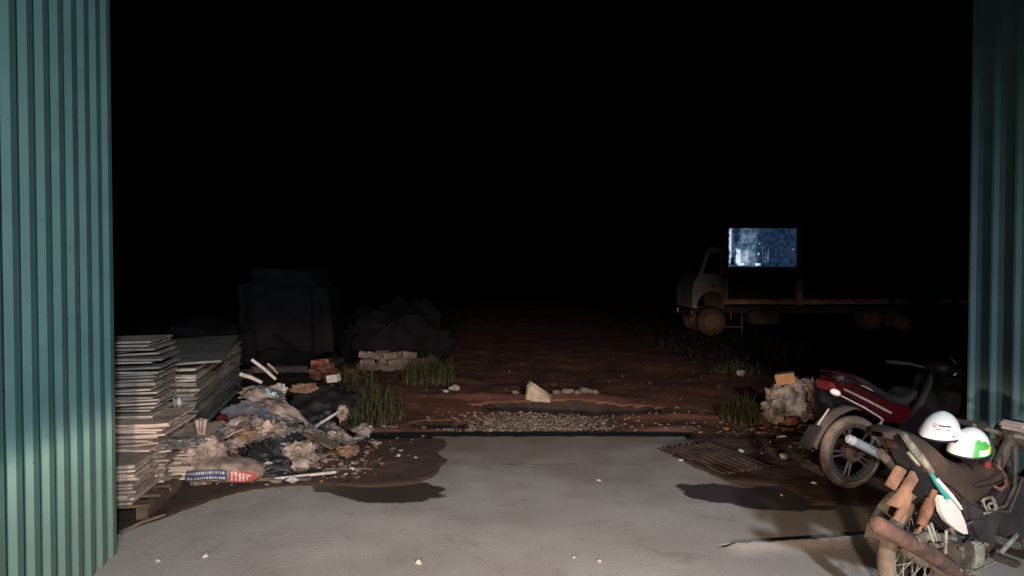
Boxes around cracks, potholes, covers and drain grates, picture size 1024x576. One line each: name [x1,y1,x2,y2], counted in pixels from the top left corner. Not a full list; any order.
pothole [473,400,661,416]
pothole [410,420,466,429]
